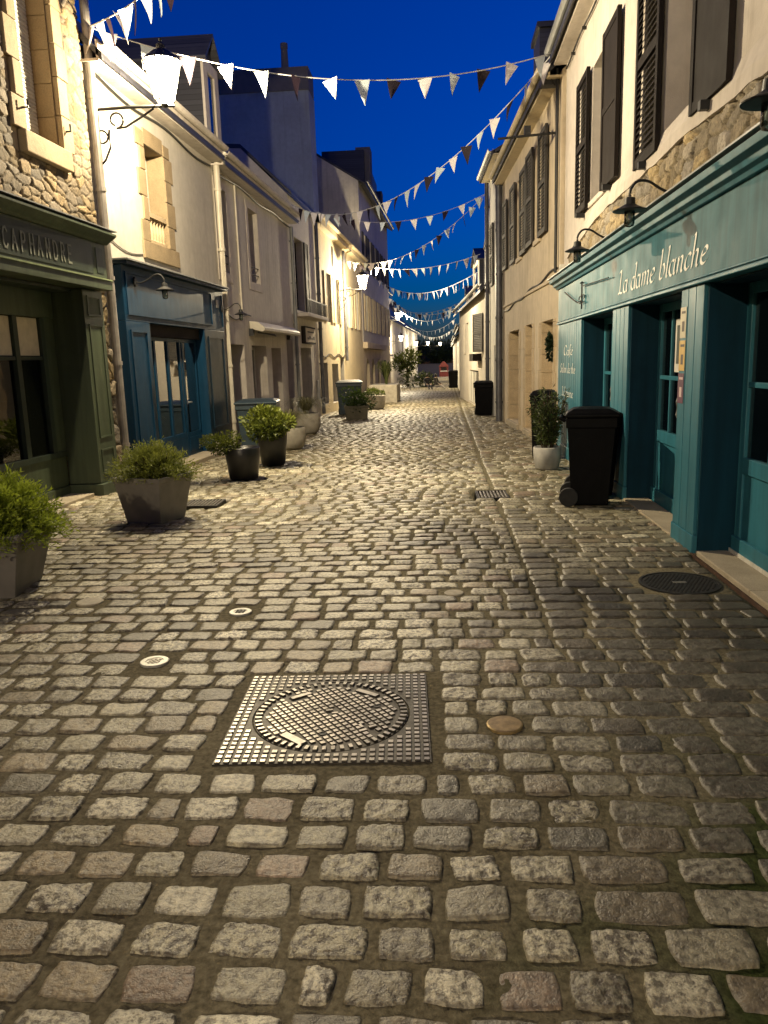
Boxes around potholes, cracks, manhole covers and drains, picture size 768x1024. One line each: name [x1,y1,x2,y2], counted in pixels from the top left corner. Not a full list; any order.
drain grate [186,499,226,510]
manhole cover [638,572,722,595]
manhole cover [212,673,432,766]
utility cover [487,716,523,735]
utility cover [140,656,169,668]
utility cover [229,608,252,617]
drain grate [475,490,510,501]
